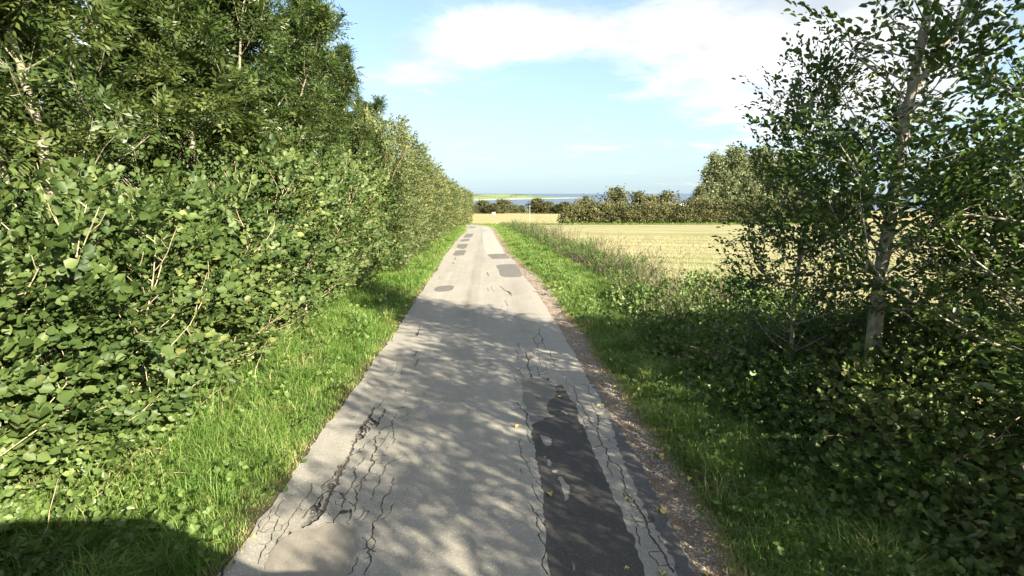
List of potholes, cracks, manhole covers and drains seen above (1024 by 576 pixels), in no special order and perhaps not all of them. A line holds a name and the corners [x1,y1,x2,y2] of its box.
crack [254,401,408,575]
crack [511,332,678,573]
